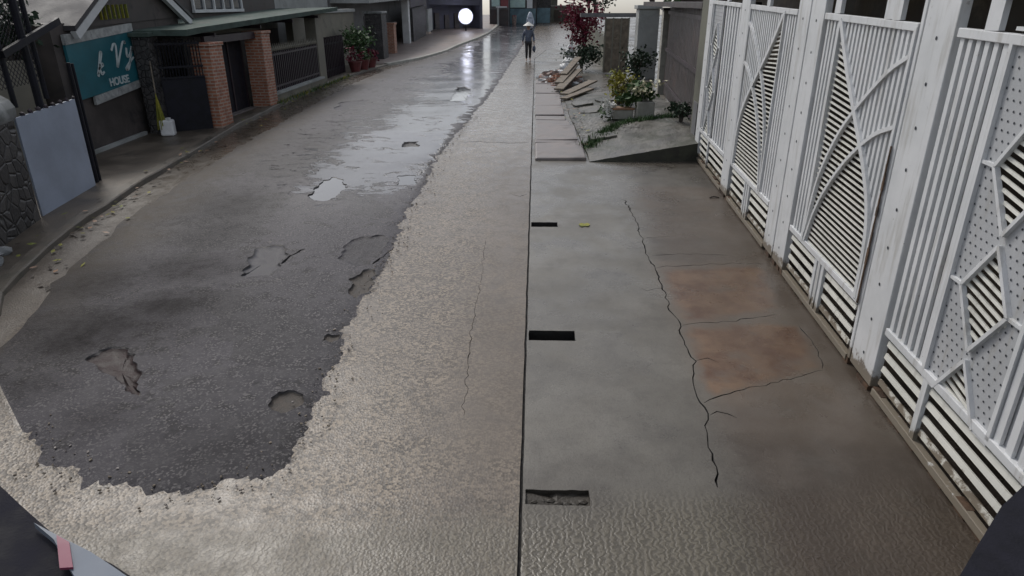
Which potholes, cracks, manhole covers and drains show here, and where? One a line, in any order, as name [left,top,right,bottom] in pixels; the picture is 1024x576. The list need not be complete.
crack [461,242,486,413]
pothole [241,245,289,277]
pothole [348,268,377,299]
pothole [307,177,347,201]
pothole [85,346,143,396]
crack [625,201,823,487]
pothole [337,235,390,267]
pothole [268,390,304,413]
